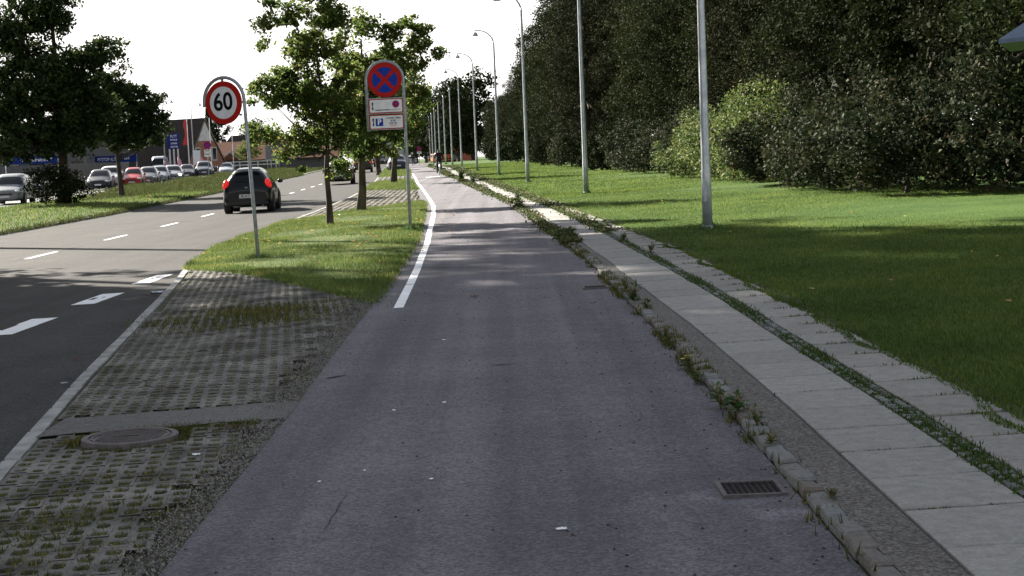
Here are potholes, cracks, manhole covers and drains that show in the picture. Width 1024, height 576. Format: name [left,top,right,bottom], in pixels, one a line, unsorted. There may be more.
manhole cover [81,427,179,451]
drain grate [714,479,788,499]
